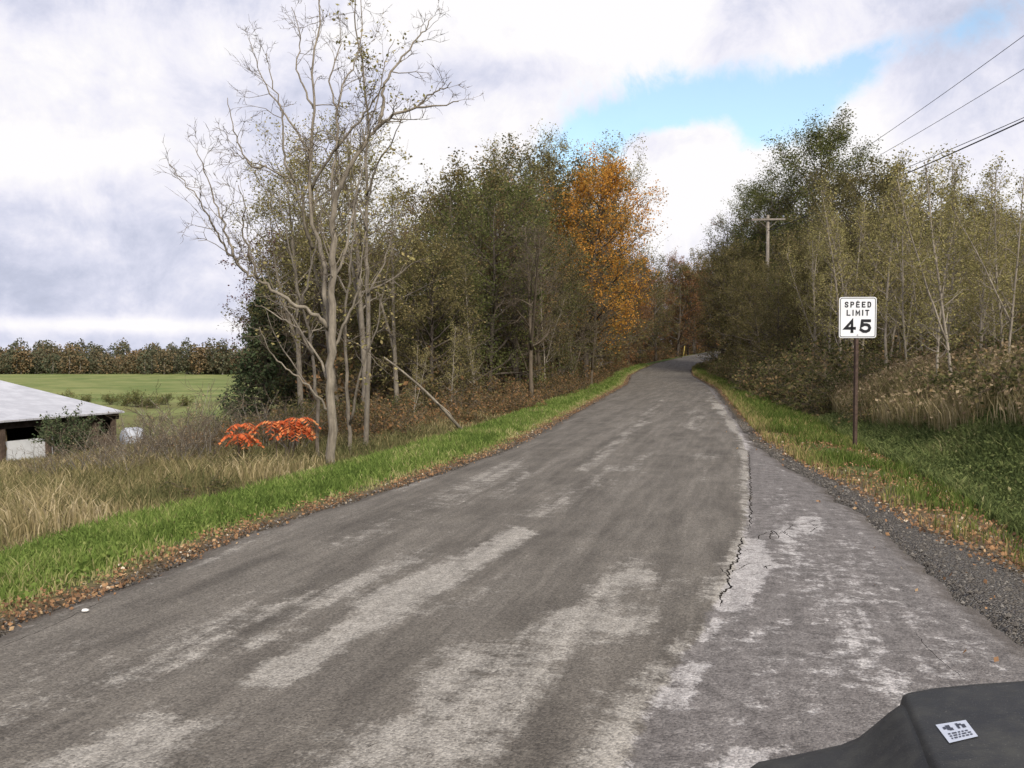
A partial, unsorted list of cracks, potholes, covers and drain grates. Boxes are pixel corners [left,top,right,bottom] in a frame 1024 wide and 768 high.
crack [719,452,821,606]
